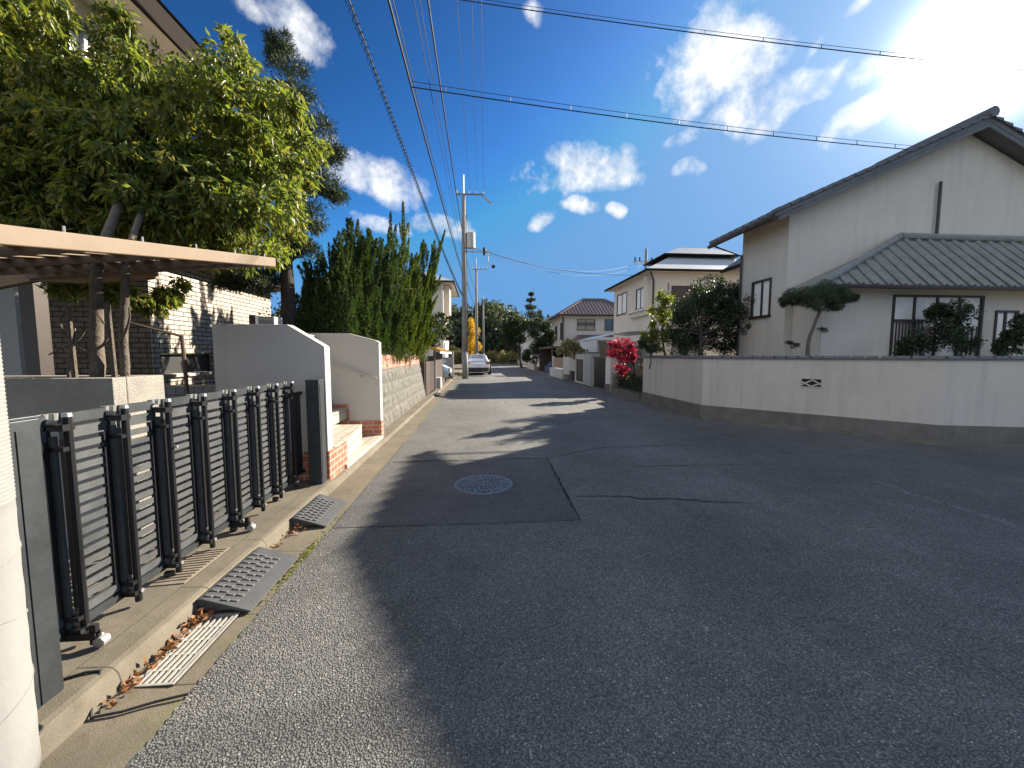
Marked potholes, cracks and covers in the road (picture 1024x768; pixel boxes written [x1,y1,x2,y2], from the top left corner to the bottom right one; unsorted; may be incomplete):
manhole cover [454,475,512,495]
drain grate [129,612,240,688]
crack [601,495,761,504]
crack [550,444,754,467]
